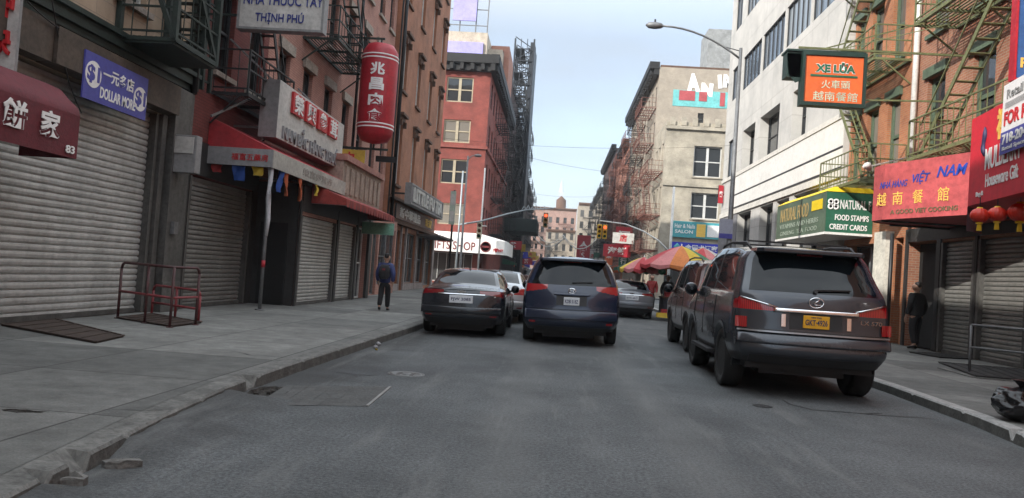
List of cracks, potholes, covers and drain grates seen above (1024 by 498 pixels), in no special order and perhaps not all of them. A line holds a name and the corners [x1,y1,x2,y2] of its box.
pothole [247,386,293,396]
